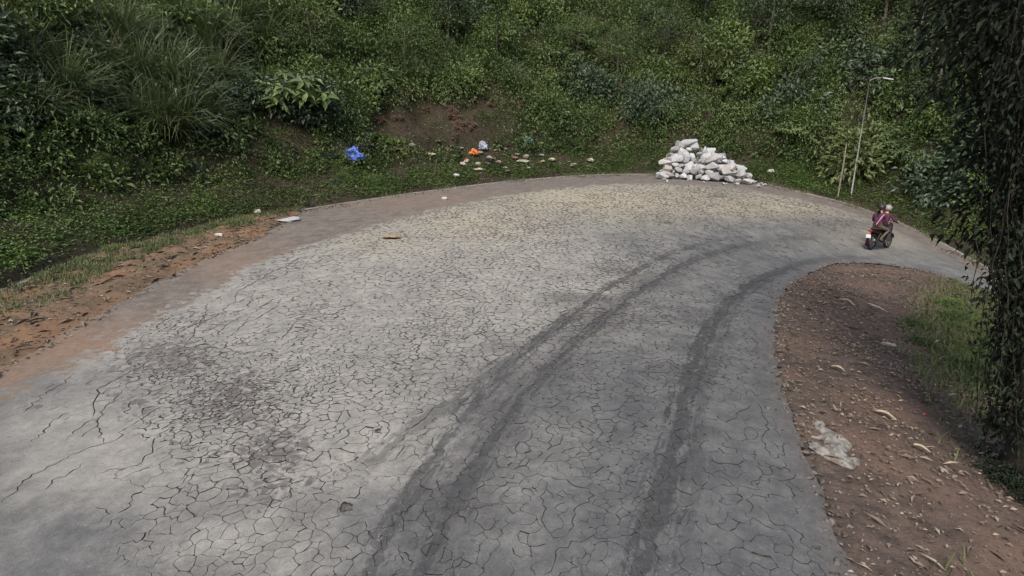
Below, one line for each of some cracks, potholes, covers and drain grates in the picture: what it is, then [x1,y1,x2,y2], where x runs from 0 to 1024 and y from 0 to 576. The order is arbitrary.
crack [1,184,873,576]
pothole [339,502,353,513]
